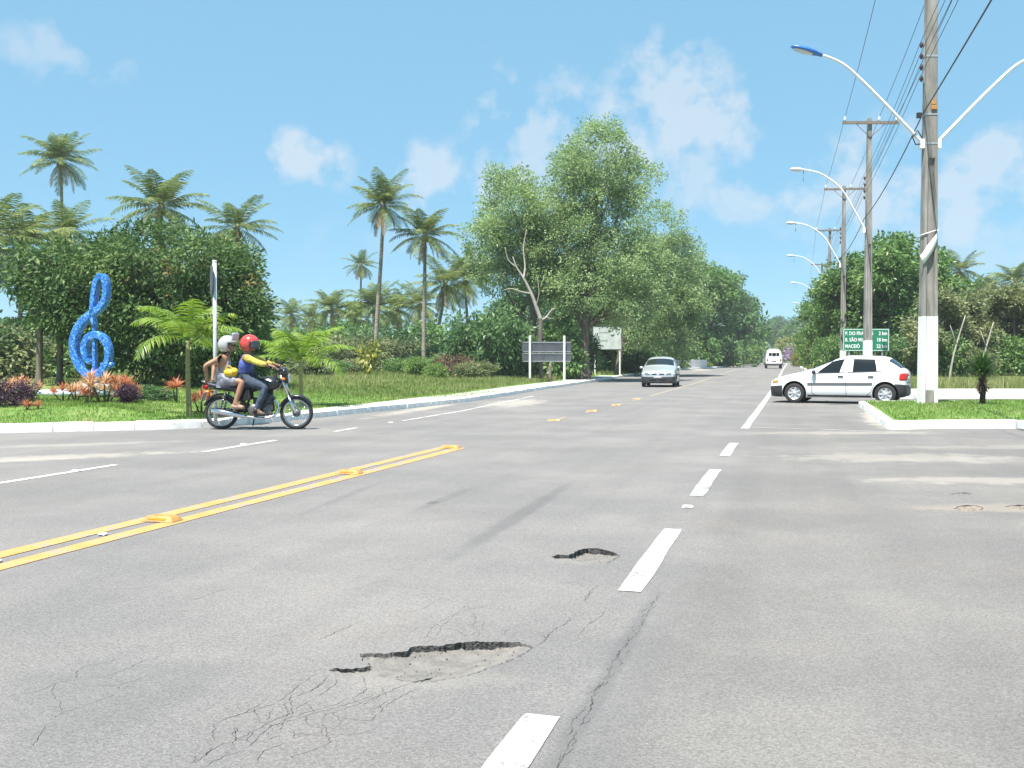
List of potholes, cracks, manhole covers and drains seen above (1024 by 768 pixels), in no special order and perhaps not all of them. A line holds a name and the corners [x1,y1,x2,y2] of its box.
crack [557,595,660,768]
pothole [552,548,620,564]
crack [2,656,159,754]
crack [535,582,613,647]
pothole [329,641,534,683]
crack [194,674,433,767]
